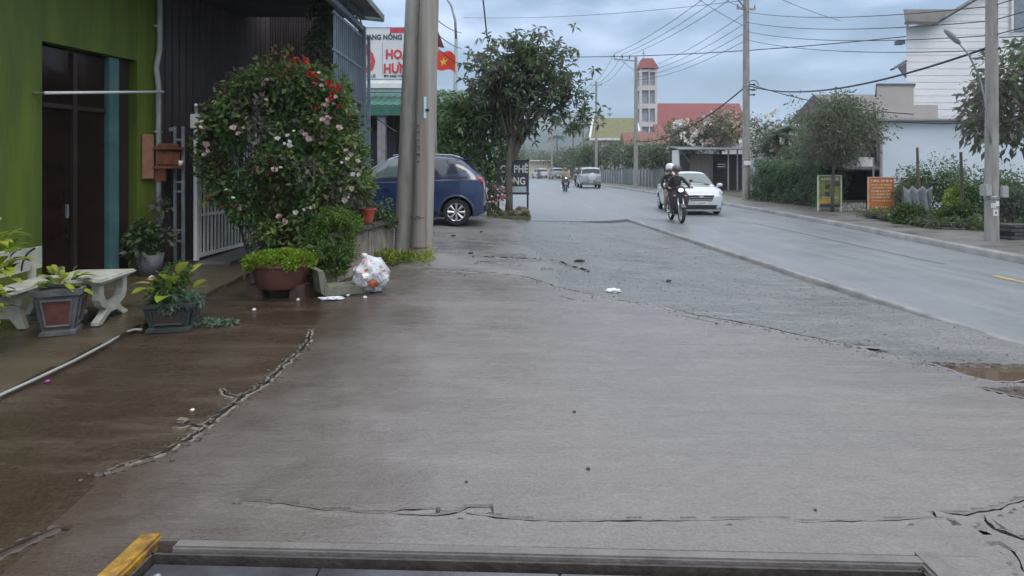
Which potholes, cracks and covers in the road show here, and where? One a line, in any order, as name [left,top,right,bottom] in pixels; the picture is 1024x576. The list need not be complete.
pothole [924,361,1024,383]
crack [78,328,316,482]
crack [241,497,1024,576]
